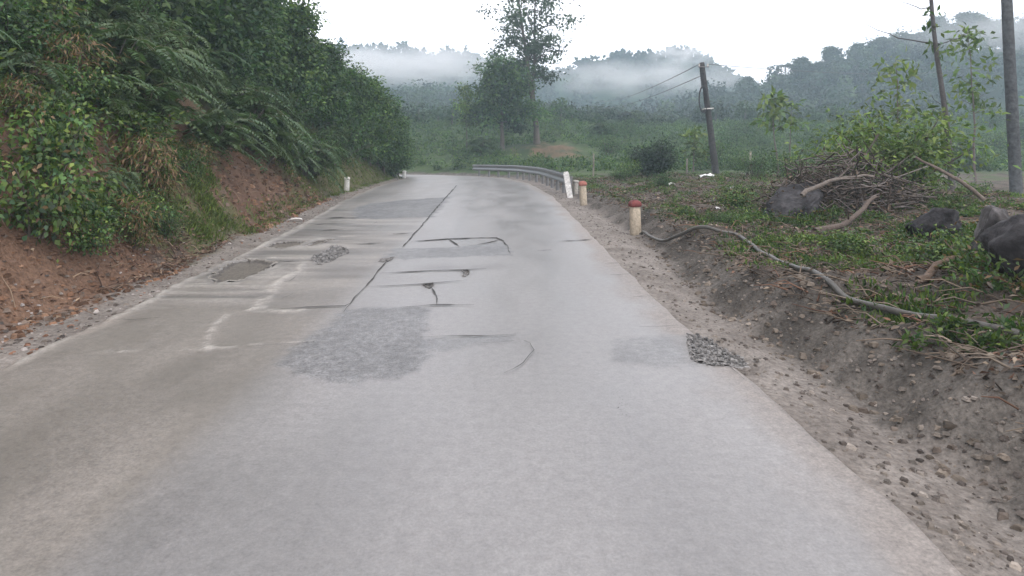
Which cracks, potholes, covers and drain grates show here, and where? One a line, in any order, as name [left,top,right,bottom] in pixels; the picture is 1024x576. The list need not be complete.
pothole [208,258,278,284]
crack [430,334,534,370]
crack [241,185,511,311]
